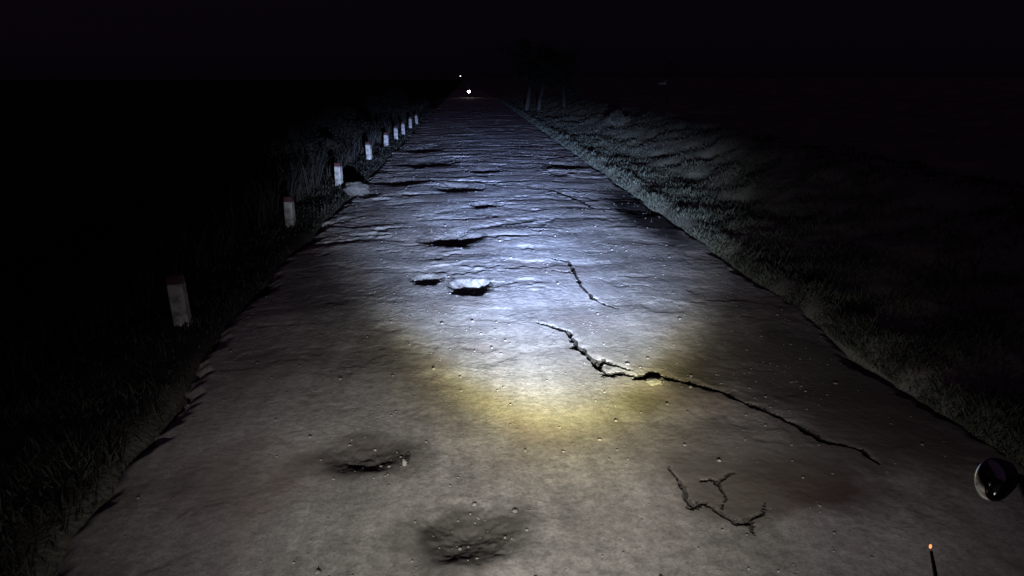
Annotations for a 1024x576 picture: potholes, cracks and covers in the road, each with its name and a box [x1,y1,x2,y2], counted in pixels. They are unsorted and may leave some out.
pothole [446,278,495,297]
pothole [467,201,500,209]
crack [536,258,880,536]
pothole [398,145,446,154]
pothole [416,227,488,249]
pothole [538,161,590,169]
pothole [405,496,535,571]
pothole [465,167,509,175]
pothole [429,182,487,194]
pothole [407,273,445,286]
pothole [313,437,417,479]
